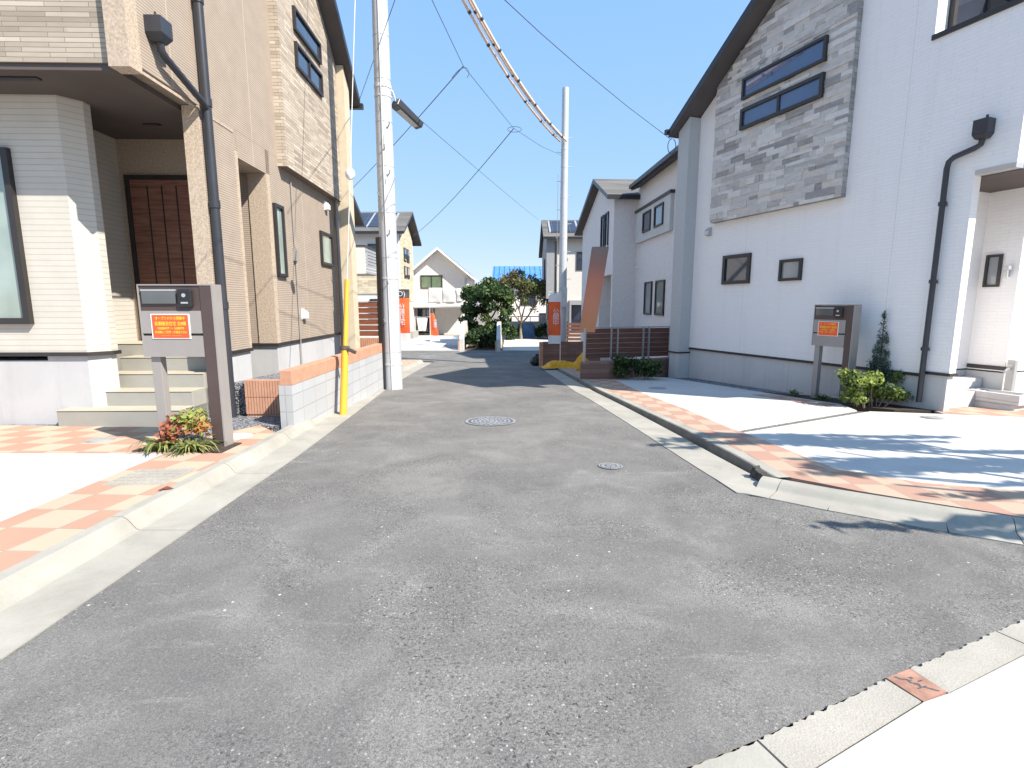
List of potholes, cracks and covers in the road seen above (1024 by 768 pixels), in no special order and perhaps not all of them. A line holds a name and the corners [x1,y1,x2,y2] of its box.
utility cover [101,468,196,486]
manhole cover [465,417,516,426]
